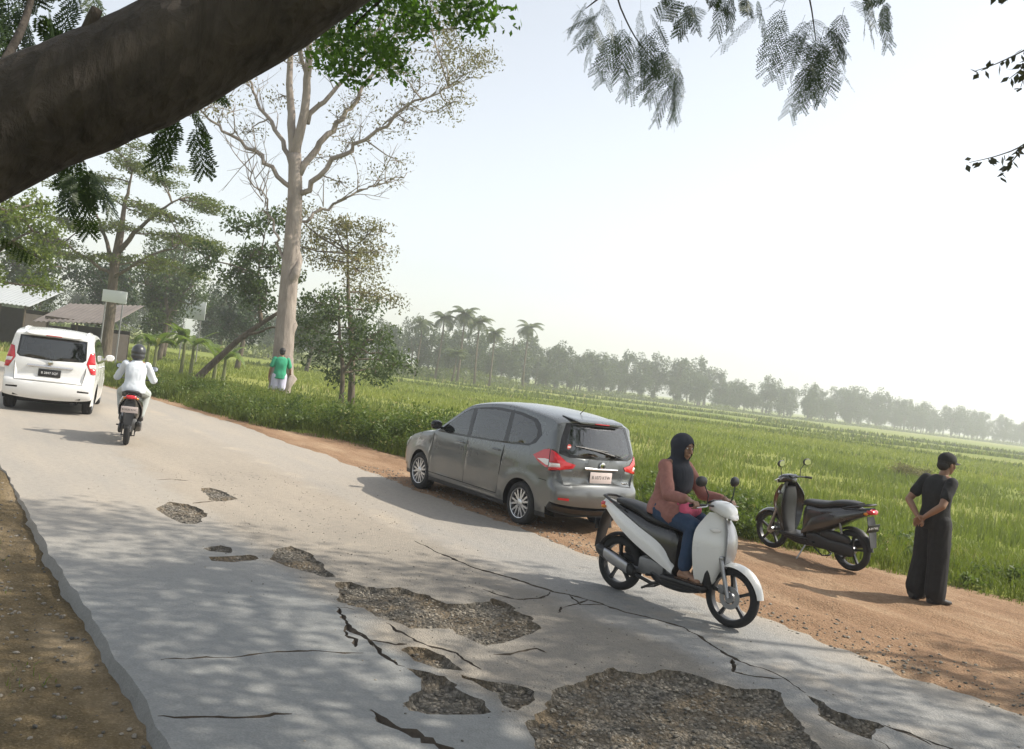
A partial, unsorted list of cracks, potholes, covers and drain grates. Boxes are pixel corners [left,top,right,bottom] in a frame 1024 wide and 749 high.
crack [160,607,546,669]
pothole [203,545,232,553]
pothole [461,674,535,710]
pothole [403,668,491,715]
pothole [807,695,884,740]
pothole [525,668,821,749]
crack [415,541,806,693]
crack [875,725,953,749]
crack [370,709,454,749]
pothole [156,502,208,524]
pothole [270,546,335,577]
pothole [201,488,237,502]
